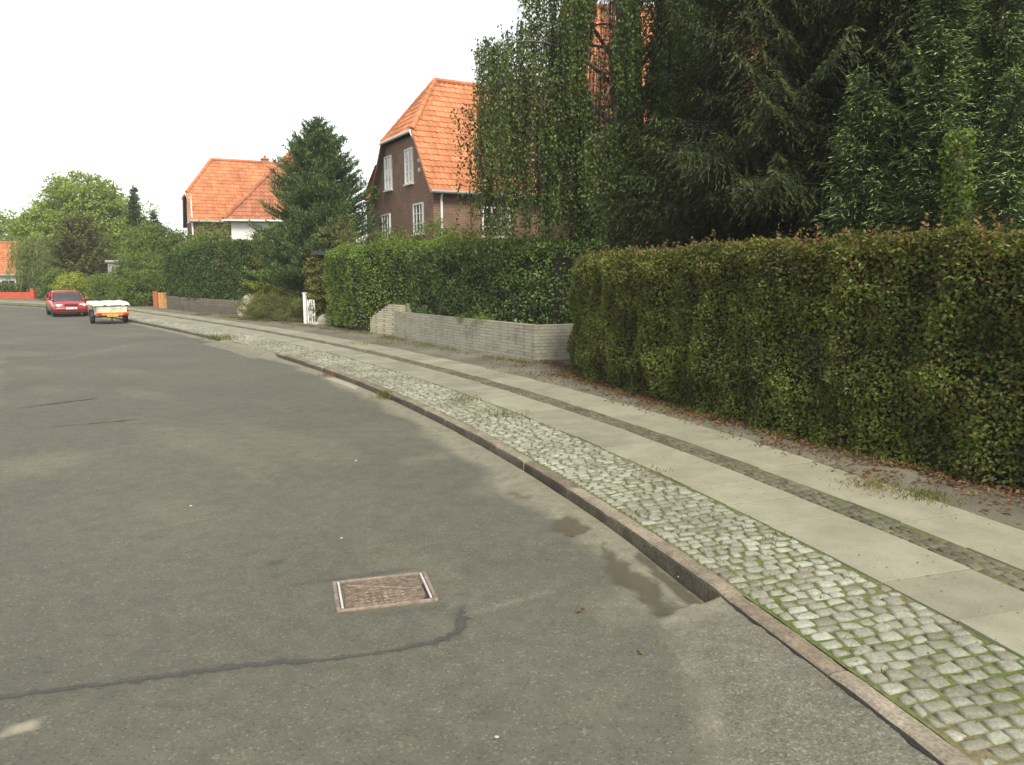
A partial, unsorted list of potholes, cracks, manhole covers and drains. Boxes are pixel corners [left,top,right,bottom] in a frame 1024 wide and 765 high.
manhole cover [332,571,438,613]
